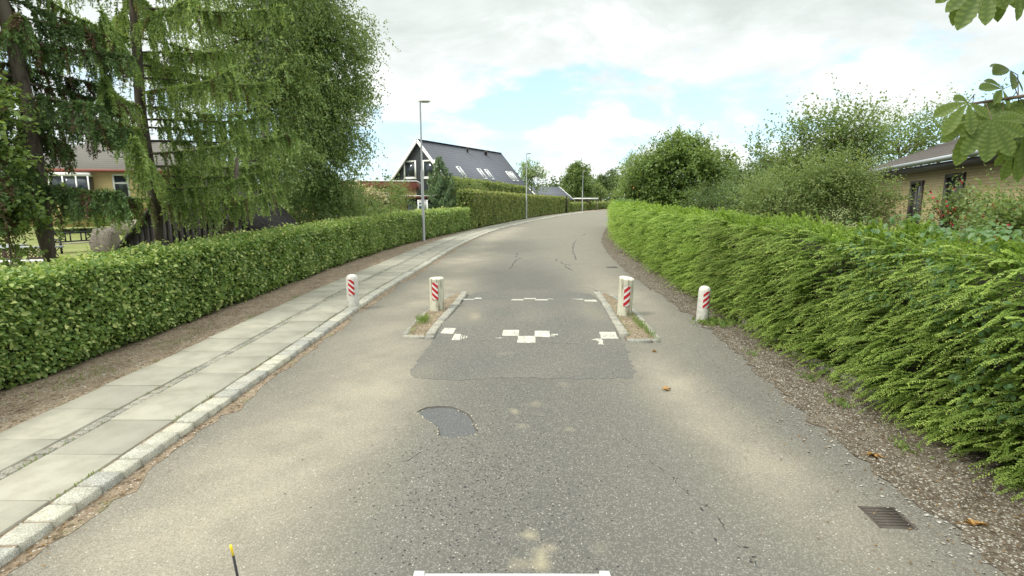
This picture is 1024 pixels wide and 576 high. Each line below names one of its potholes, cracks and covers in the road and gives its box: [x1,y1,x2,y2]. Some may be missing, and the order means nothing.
drain grate [858,506,919,530]
crack [622,436,759,568]
